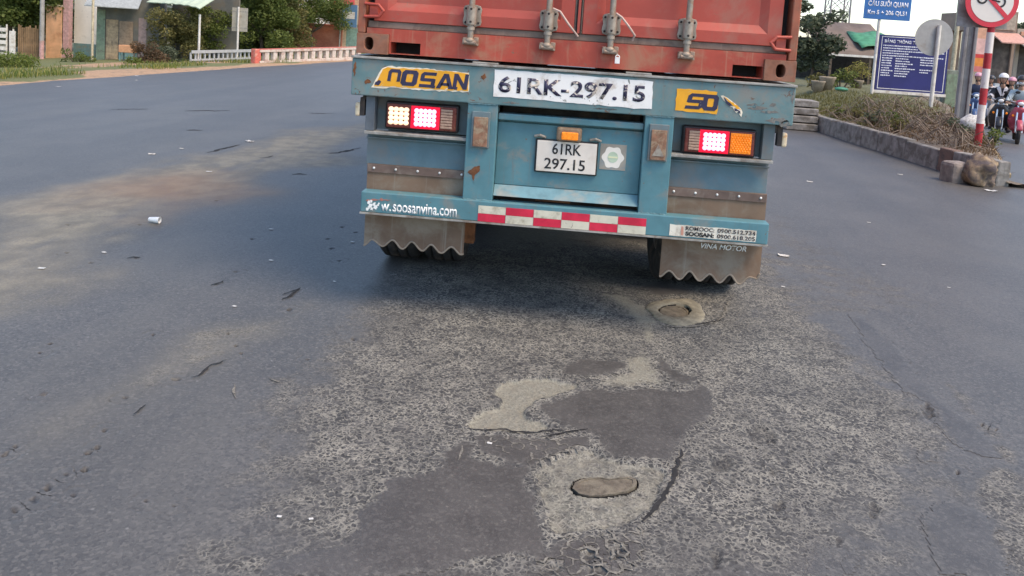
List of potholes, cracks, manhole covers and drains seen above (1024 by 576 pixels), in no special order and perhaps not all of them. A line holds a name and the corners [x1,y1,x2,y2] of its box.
manhole cover [659,304,689,317]
manhole cover [570,477,639,499]
crack [533,449,684,576]
crack [458,428,585,465]
